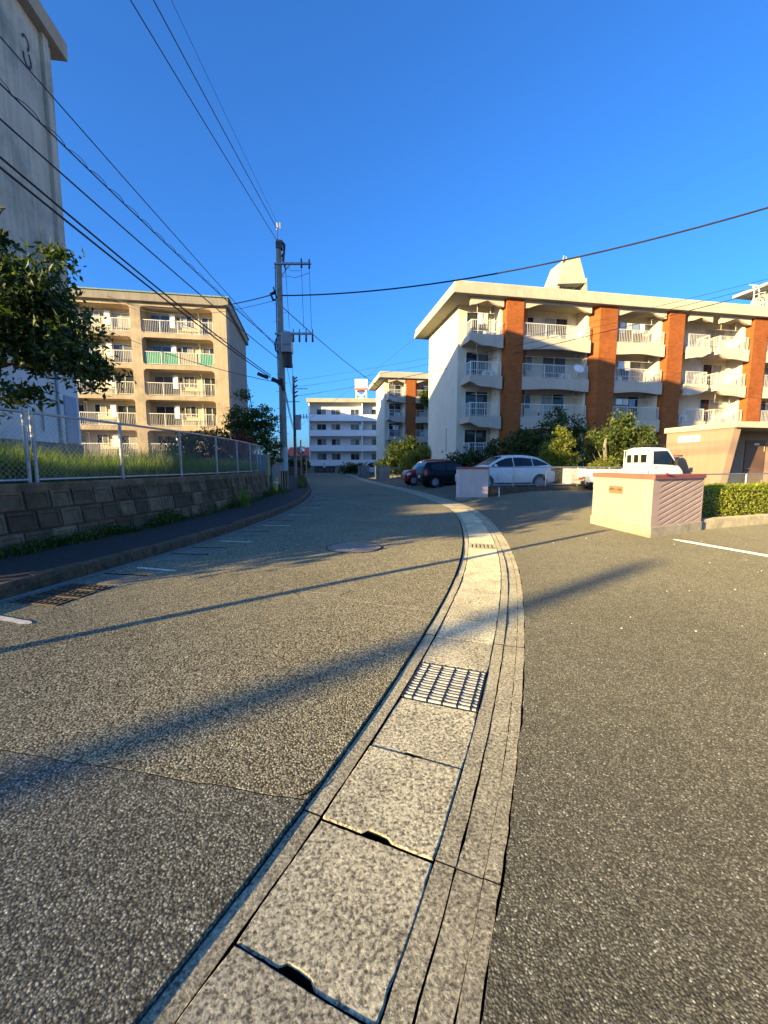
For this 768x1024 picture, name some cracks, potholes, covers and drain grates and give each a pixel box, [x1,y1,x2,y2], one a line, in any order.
manhole cover [326,542,382,553]
drain grate [402,662,486,714]
drain grate [57,583,114,592]
drain grate [9,596,75,606]
drain grate [34,589,96,599]
